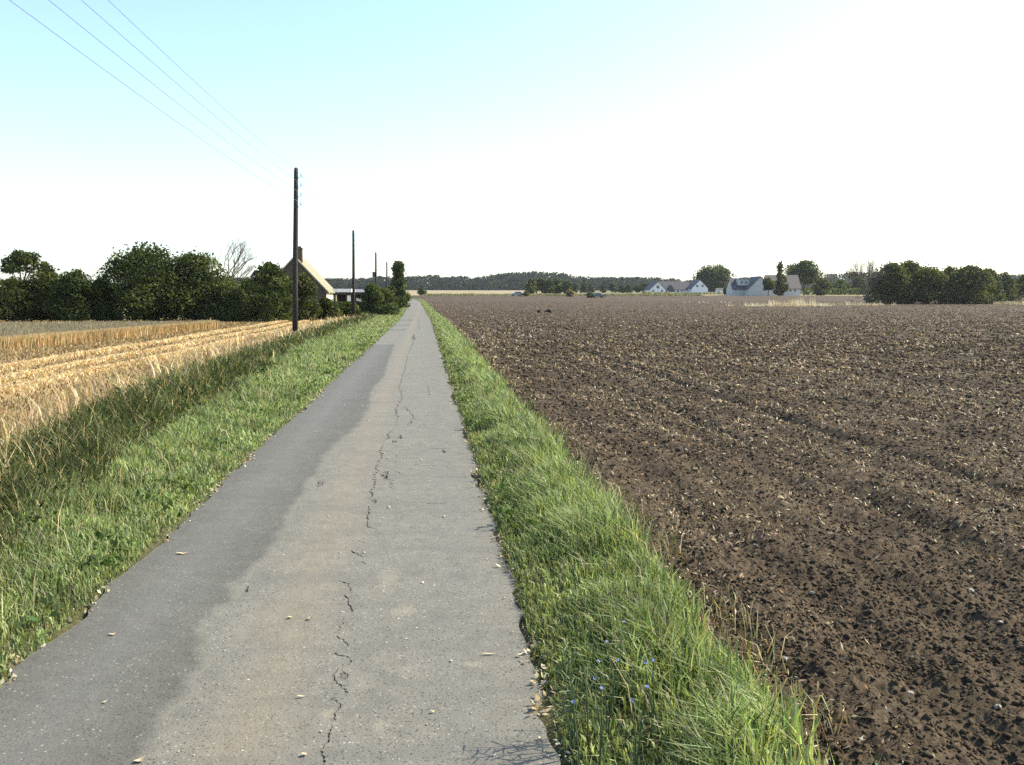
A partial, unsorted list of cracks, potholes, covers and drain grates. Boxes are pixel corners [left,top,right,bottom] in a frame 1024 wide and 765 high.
crack [320,581,353,765]
crack [351,344,445,564]
